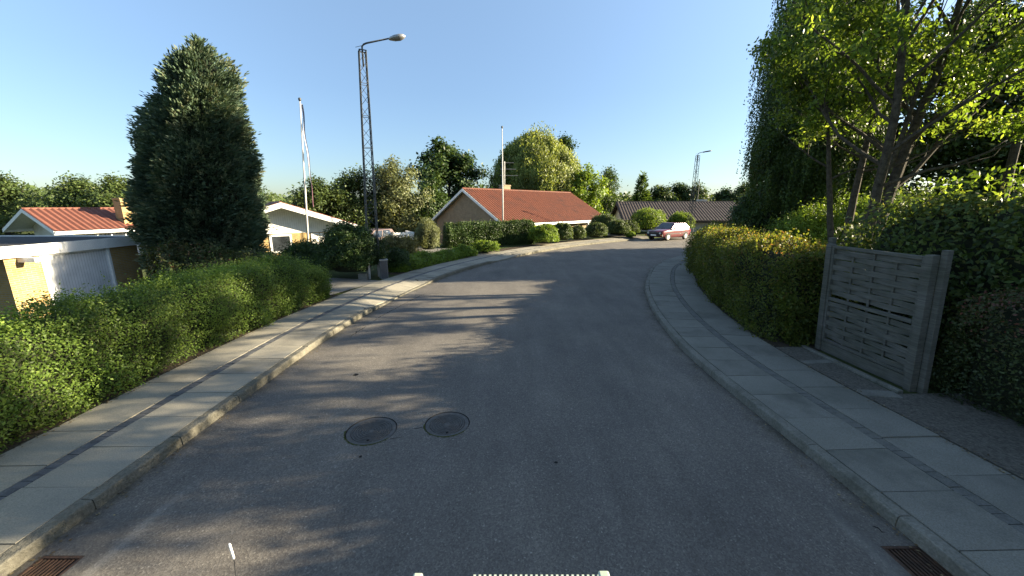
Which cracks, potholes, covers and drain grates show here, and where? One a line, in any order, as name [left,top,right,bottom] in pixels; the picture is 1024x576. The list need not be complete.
manhole cover [343,417,397,446]
manhole cover [423,412,470,437]
drain grate [18,556,84,576]
drain grate [880,546,953,576]
